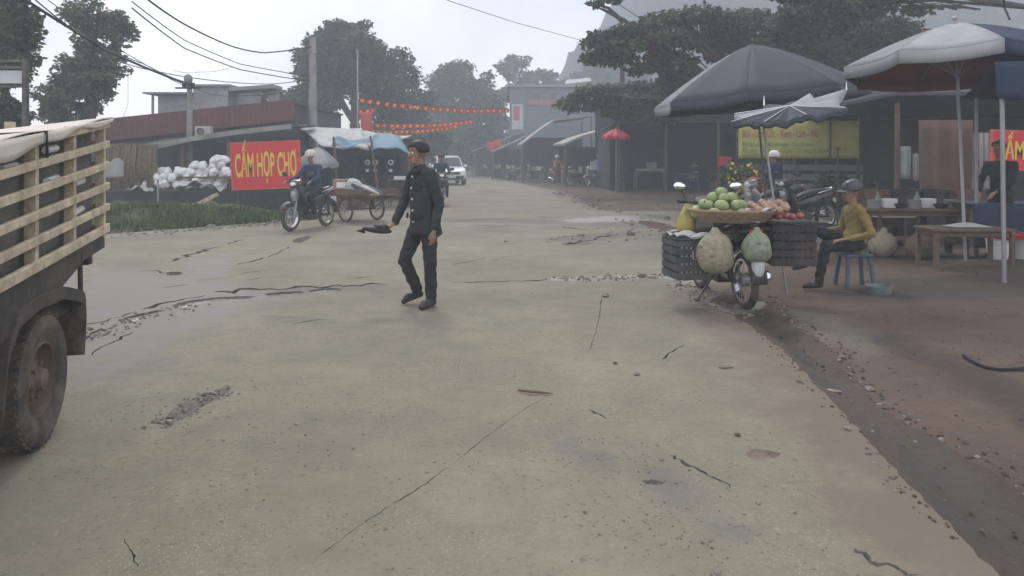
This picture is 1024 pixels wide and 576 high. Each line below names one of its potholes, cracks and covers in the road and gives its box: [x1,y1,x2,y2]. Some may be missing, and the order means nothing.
pothole [160,386,233,430]
crack [87,240,379,355]
crack [547,217,637,244]
crack [670,455,731,489]
